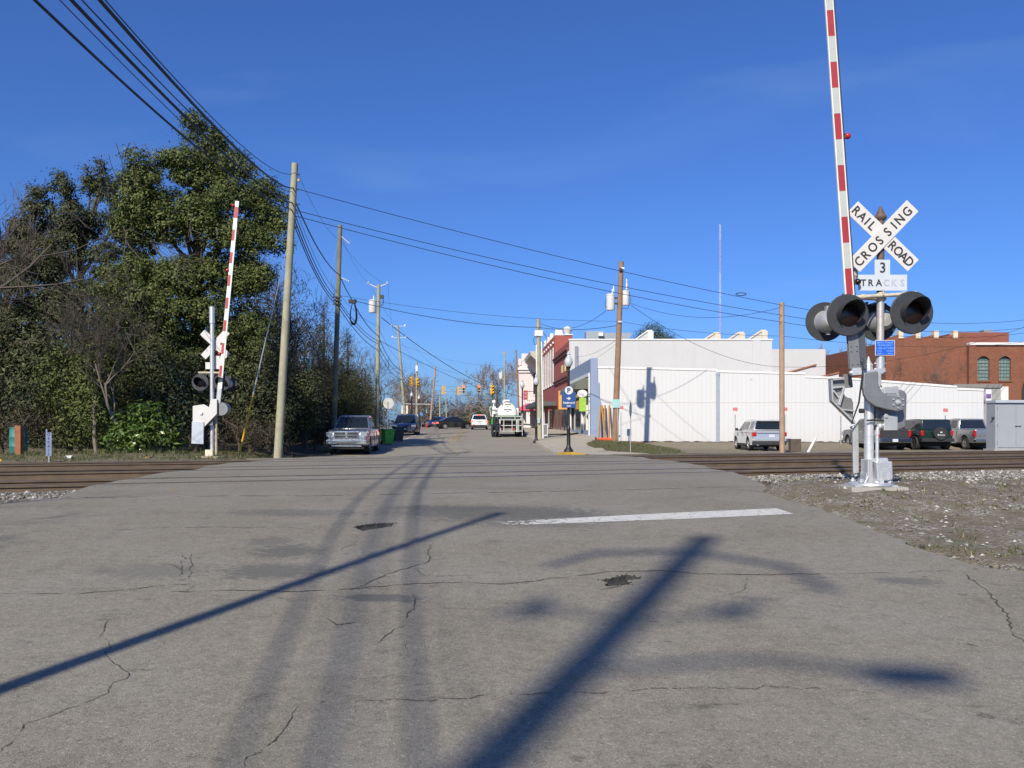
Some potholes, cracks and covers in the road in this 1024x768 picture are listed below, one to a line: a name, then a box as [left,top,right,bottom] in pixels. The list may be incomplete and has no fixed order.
crack [8,545,822,680]
crack [967,575,1024,642]
pothole [353,522,396,531]
crack [0,621,129,752]
pothole [598,573,641,586]
